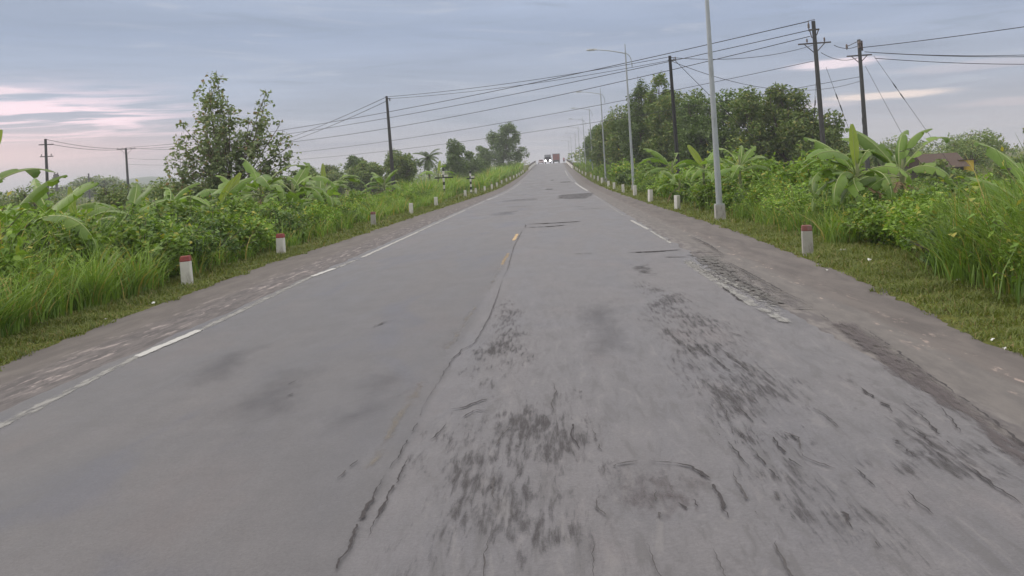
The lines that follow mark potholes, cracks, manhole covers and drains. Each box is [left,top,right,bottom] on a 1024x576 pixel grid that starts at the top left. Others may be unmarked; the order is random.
crack [841,511,880,547]
crack [433,399,486,438]
crack [551,383,637,514]
crack [655,402,834,519]
crack [971,467,1023,505]
crack [860,328,1024,463]
crack [336,460,407,568]
crack [641,237,804,309]
